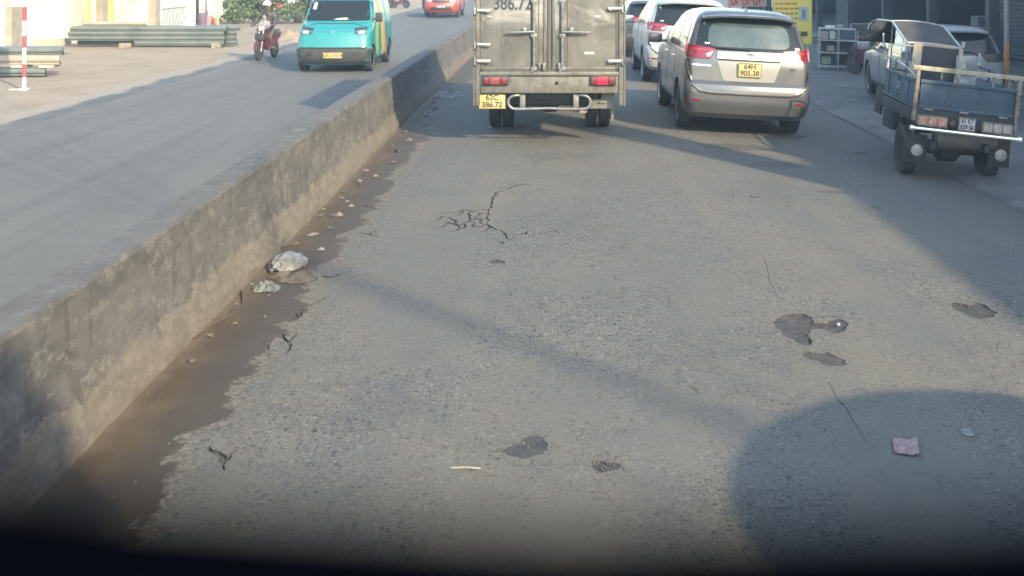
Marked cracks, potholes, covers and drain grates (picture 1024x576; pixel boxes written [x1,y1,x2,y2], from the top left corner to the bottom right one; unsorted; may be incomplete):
pothole [591,461,622,473]
crack [828,382,879,448]
crack [433,184,559,240]
pothole [774,314,848,347]
pothole [500,435,548,459]
pothole [804,352,847,366]
pothole [951,303,997,319]
